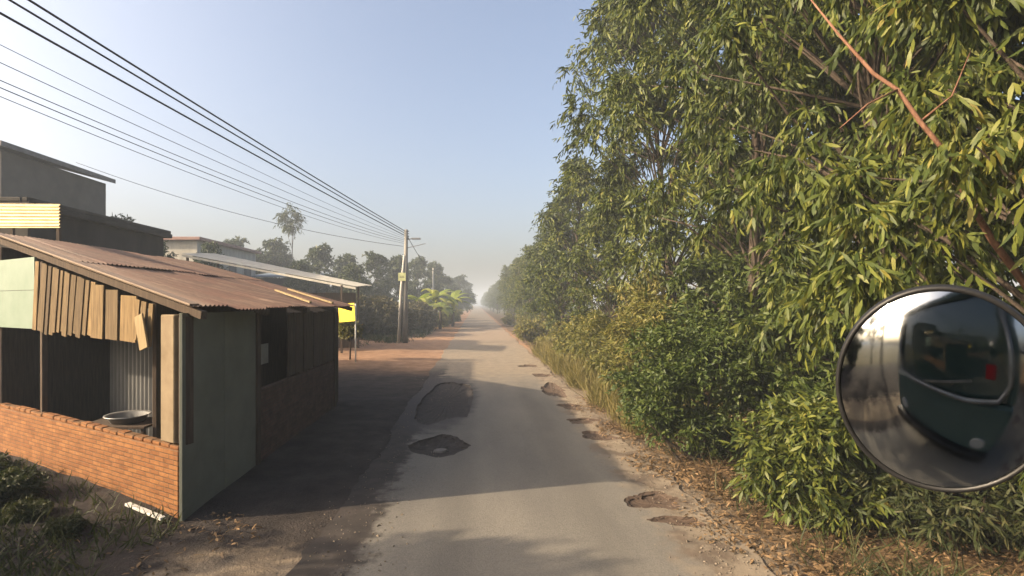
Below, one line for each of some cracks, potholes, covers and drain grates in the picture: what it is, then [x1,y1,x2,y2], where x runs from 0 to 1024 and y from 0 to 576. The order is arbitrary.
pothole [408,434,471,457]
pothole [582,430,619,441]
pothole [624,491,682,510]
pothole [541,382,567,398]
pothole [414,382,473,425]
pothole [647,515,705,527]
